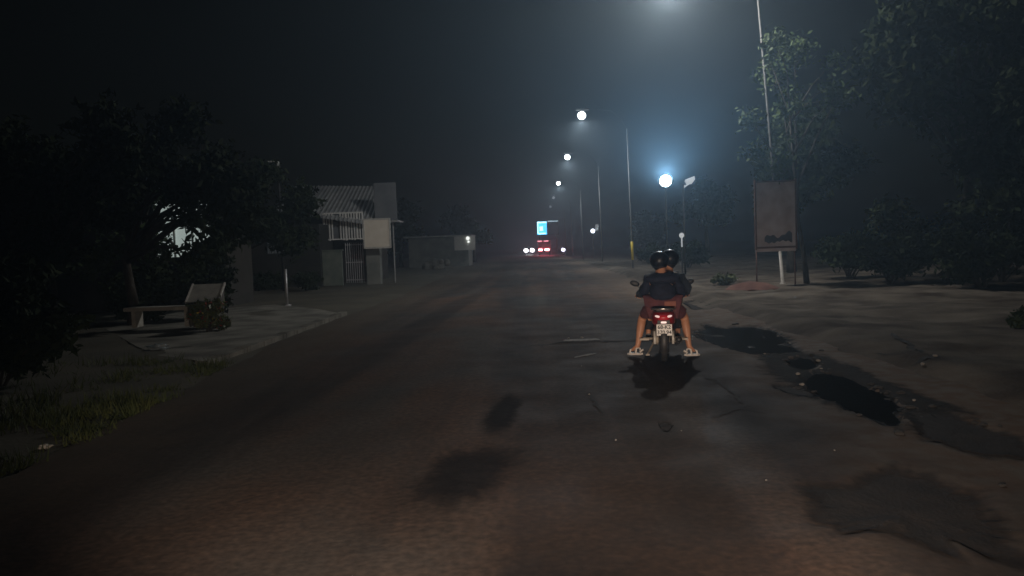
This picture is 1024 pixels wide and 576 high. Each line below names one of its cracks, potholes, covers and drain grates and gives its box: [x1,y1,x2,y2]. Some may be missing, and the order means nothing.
pothole [786,357,819,370]
pothole [690,325,804,354]
crack [589,393,629,423]
crack [694,374,760,417]
pothole [905,408,1024,458]
pothole [804,372,905,426]
